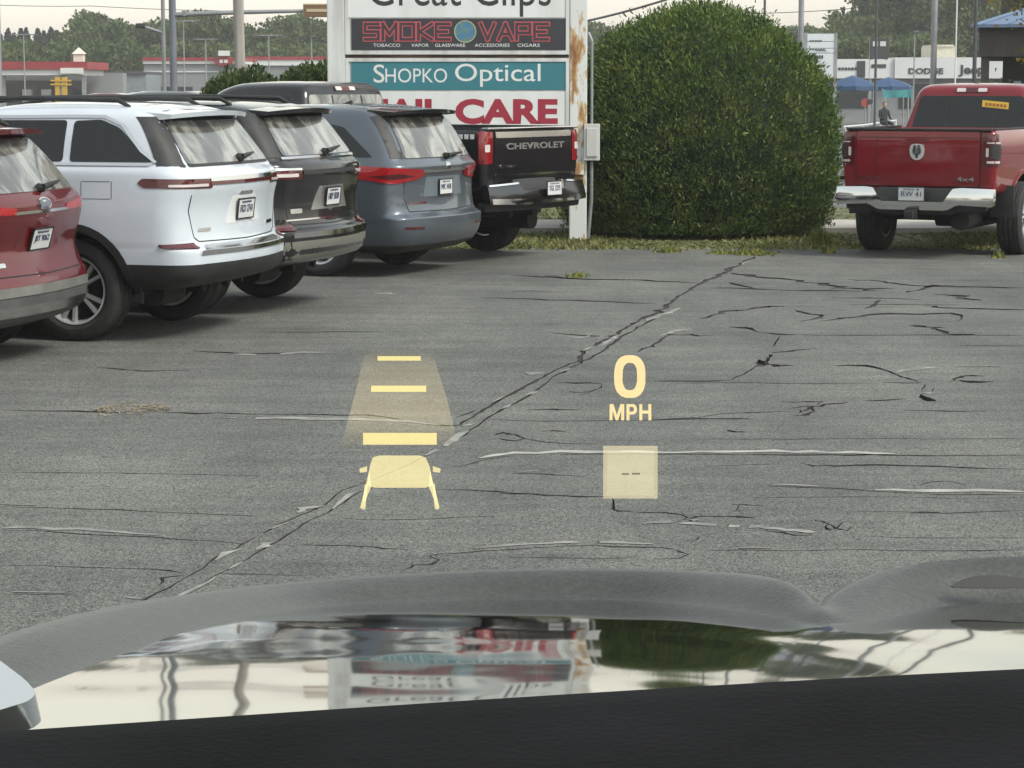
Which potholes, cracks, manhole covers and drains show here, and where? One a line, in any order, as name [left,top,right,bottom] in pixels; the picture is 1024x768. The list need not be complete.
crack [0,257,1024,601]
